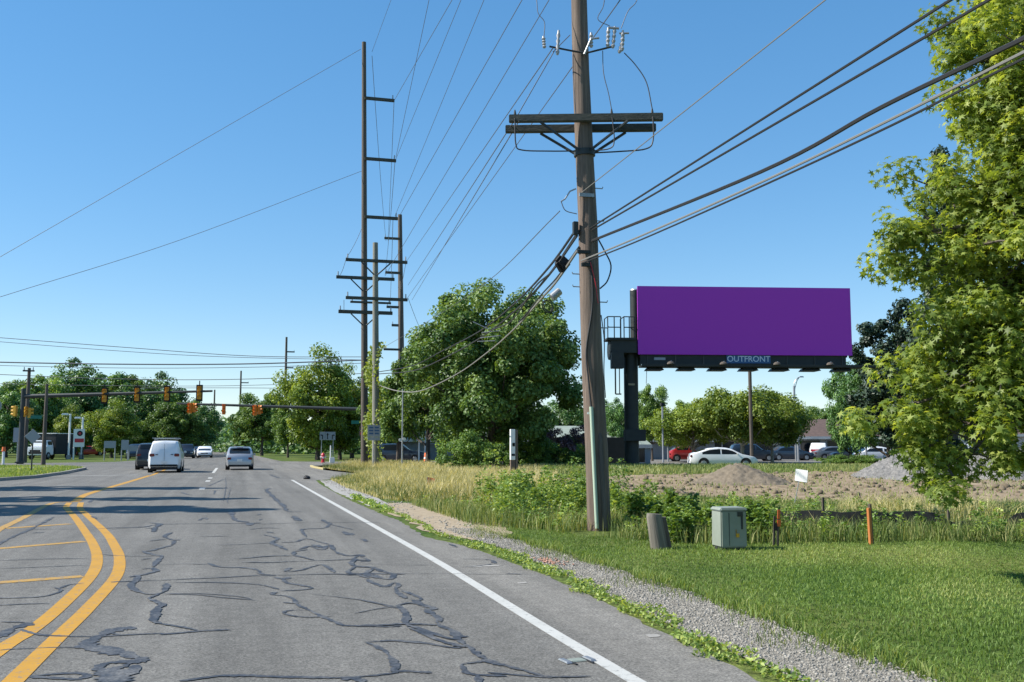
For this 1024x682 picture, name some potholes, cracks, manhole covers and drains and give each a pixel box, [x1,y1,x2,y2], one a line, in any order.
crack [0,583,231,650]
crack [317,594,396,613]
crack [208,475,381,545]
crack [105,554,279,600]
